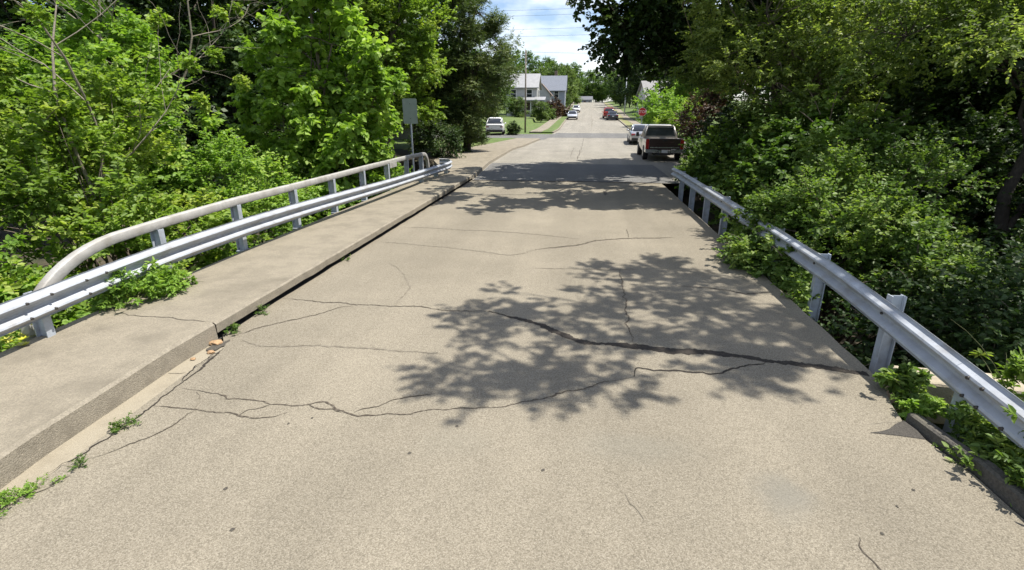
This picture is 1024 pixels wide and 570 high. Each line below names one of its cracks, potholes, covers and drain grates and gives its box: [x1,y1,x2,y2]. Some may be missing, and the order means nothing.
crack [0,268,869,512]
crack [535,229,674,250]
